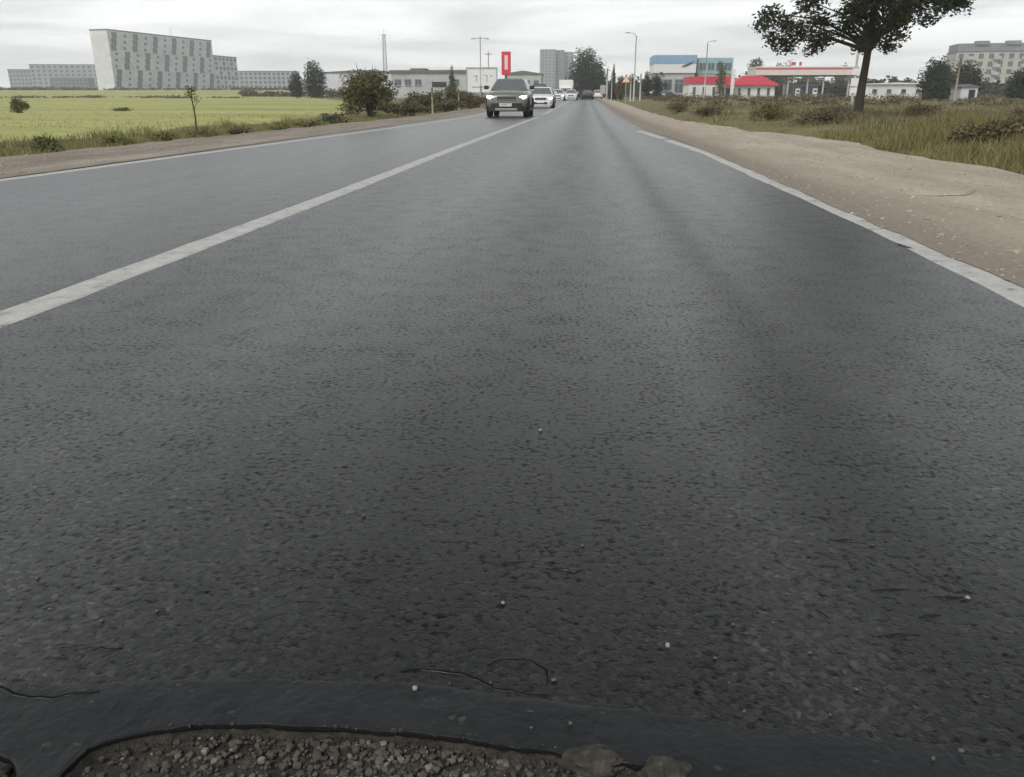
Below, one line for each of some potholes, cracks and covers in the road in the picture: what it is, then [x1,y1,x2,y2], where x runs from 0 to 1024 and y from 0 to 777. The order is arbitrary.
crack [0,685,100,700]
crack [401,659,549,696]
pothole [65,728,637,777]
